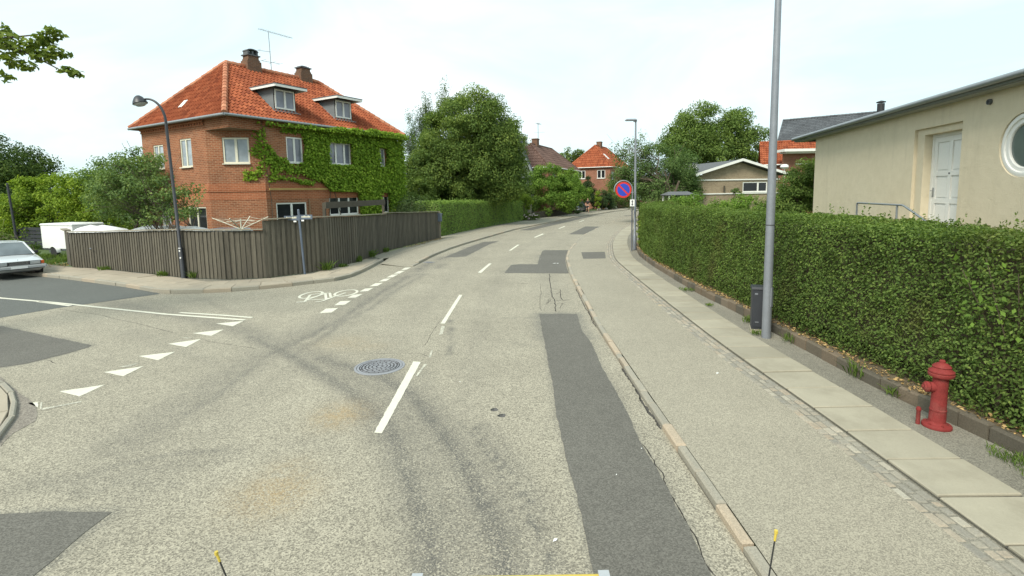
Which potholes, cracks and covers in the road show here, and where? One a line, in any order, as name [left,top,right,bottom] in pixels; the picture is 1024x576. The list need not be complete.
crack [522,274,564,312]
manhole cover [354,358,405,375]
